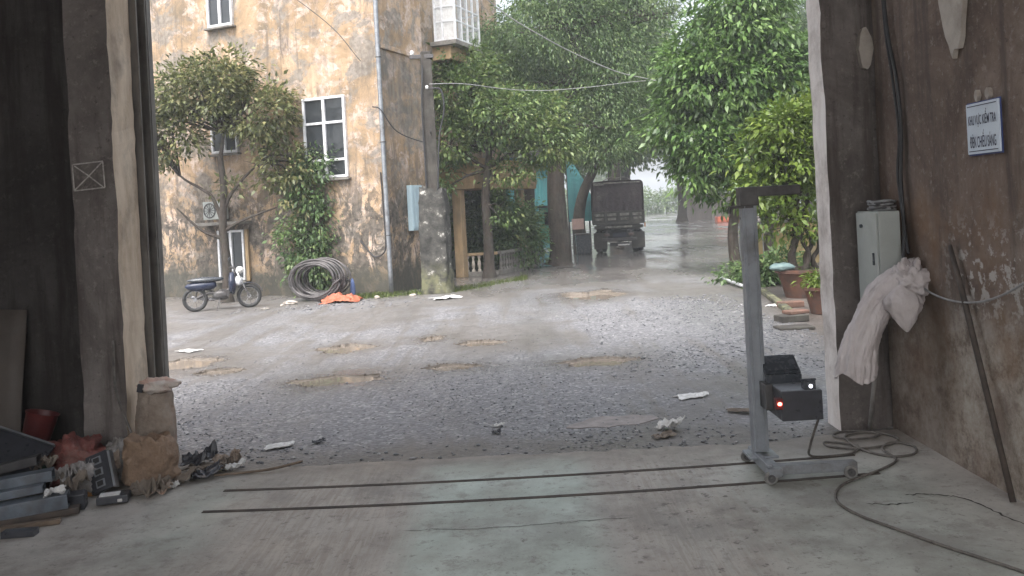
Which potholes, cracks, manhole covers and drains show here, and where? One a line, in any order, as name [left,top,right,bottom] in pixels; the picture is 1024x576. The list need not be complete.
pothole [558,289,628,300]
crack [404,517,632,531]
pothole [314,343,380,354]
pothole [169,356,228,370]
pothole [453,339,512,347]
pothole [552,355,641,367]
pothole [192,367,247,375]
crack [866,493,1024,524]
pothole [284,372,390,388]
